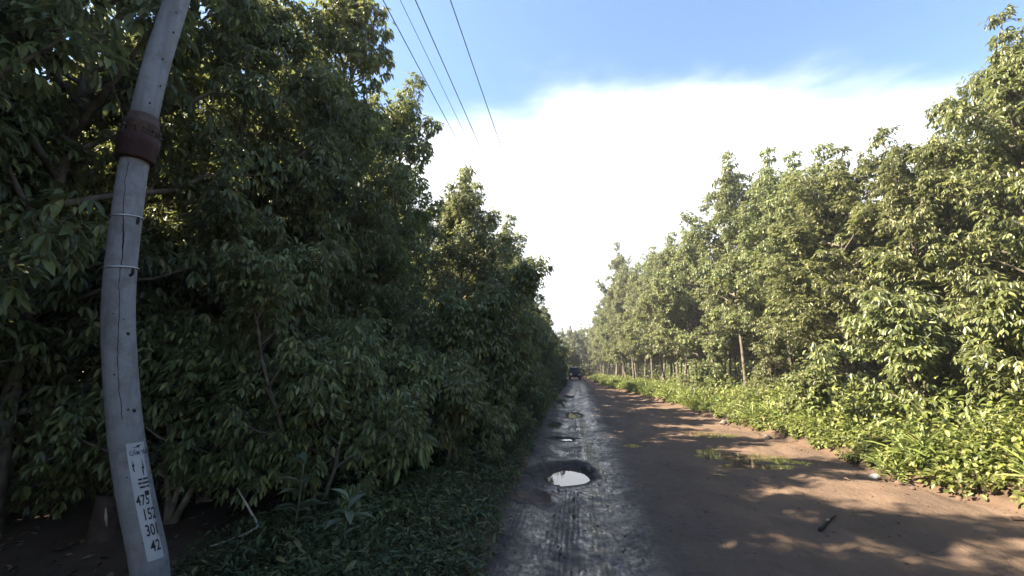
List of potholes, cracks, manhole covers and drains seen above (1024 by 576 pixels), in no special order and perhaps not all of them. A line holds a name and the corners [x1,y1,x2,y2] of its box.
pothole [563,411,585,419]
pothole [543,420,565,429]
pothole [523,459,607,492]
